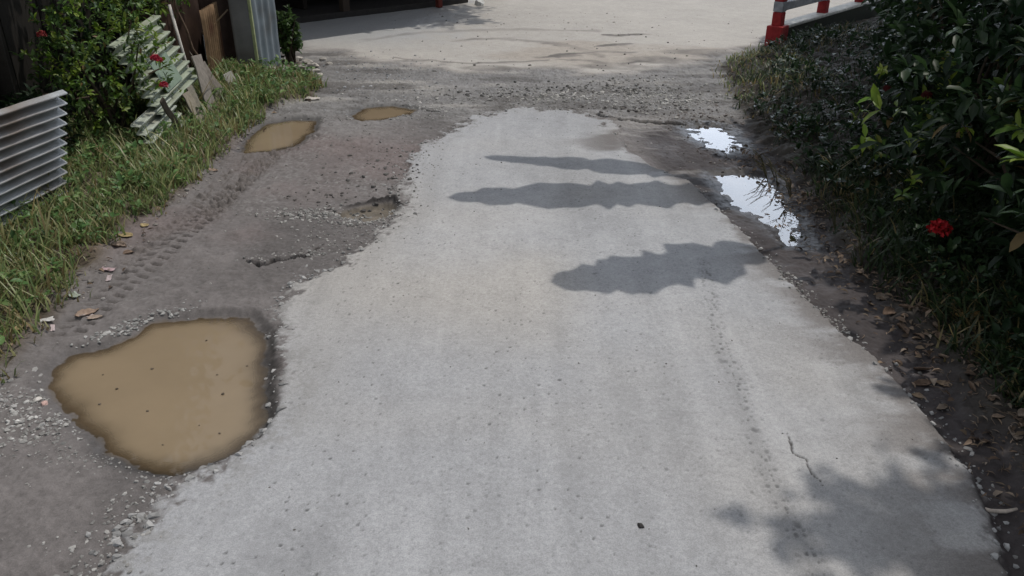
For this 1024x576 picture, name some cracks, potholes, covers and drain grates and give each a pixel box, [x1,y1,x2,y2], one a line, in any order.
pothole [683,122,745,154]
crack [244,243,325,267]
pothole [326,194,407,223]
pothole [707,169,812,250]
crack [787,432,826,486]
pothole [346,103,422,122]
pothole [234,115,323,154]
pothole [28,305,284,479]
